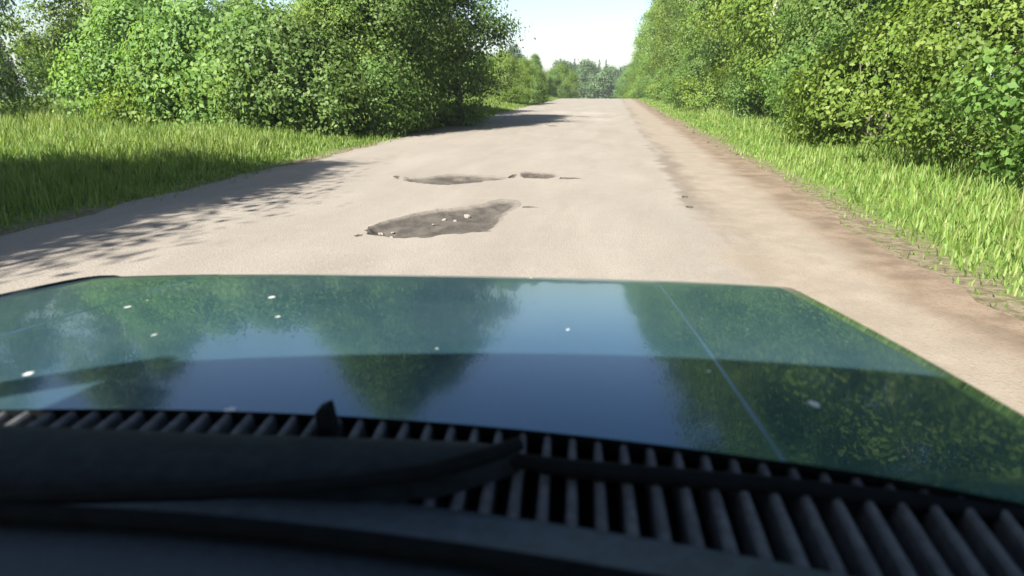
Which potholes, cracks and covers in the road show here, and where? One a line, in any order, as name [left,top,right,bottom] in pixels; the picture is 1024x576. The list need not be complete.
pothole [365,199,522,238]
pothole [520,171,557,179]
pothole [403,174,507,185]
